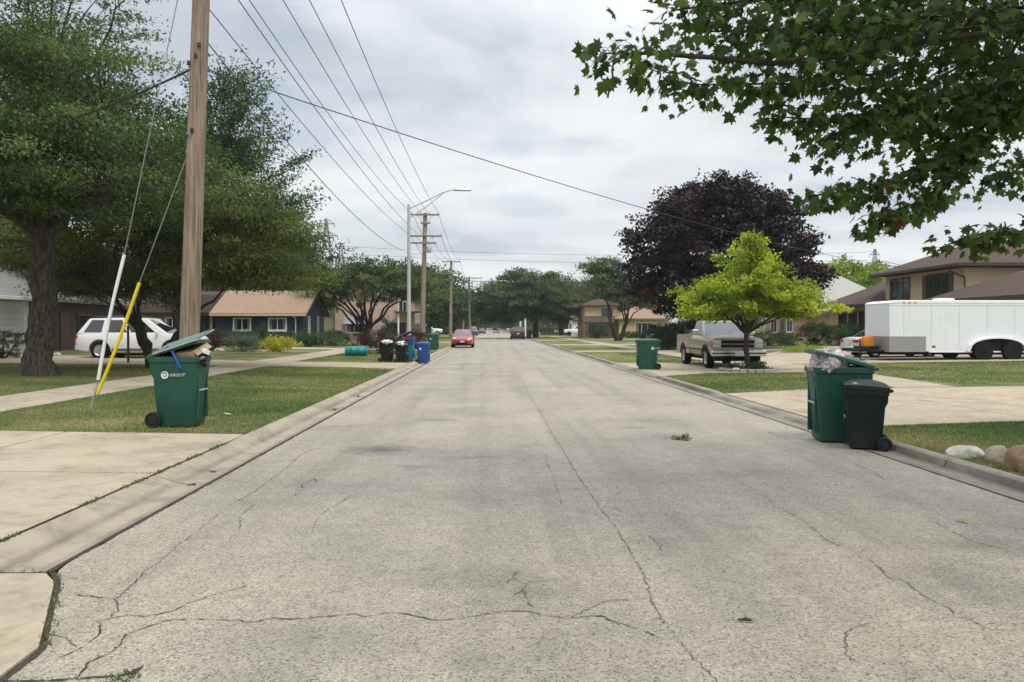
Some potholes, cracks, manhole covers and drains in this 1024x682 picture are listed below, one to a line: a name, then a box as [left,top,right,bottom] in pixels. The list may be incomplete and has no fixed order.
crack [765,495,1020,661]
crack [0,373,717,682]
